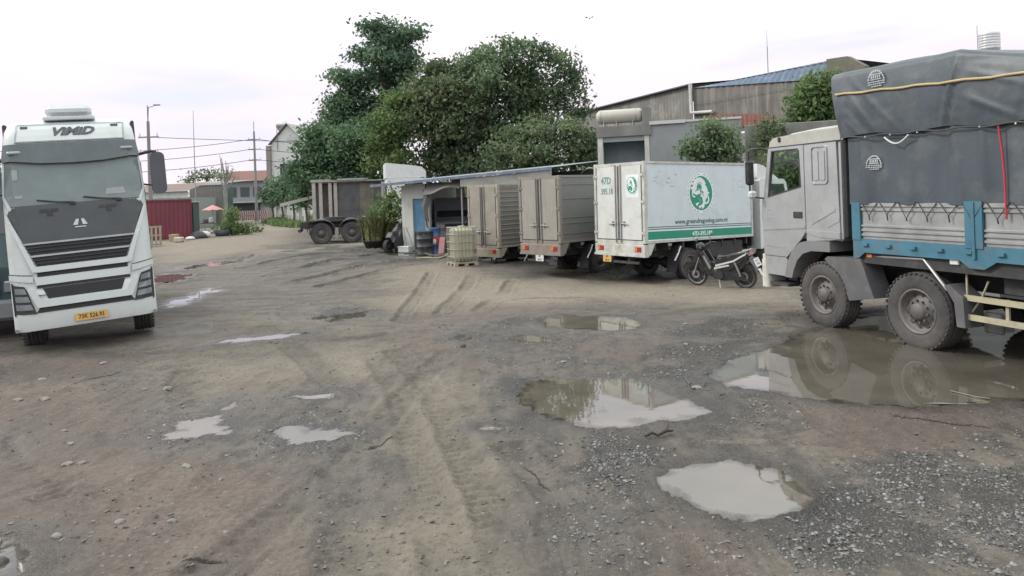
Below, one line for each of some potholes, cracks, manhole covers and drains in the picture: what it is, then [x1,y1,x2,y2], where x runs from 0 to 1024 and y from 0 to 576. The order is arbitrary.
pothole [509,371,734,434]
pothole [161,287,230,308]
pothole [147,411,251,444]
crack [891,414,991,429]
pothole [529,313,649,331]
pothole [312,309,386,323]
pothole [695,309,1024,412]
pothole [260,417,380,451]
pothole [635,450,839,530]
pothole [207,330,323,344]
